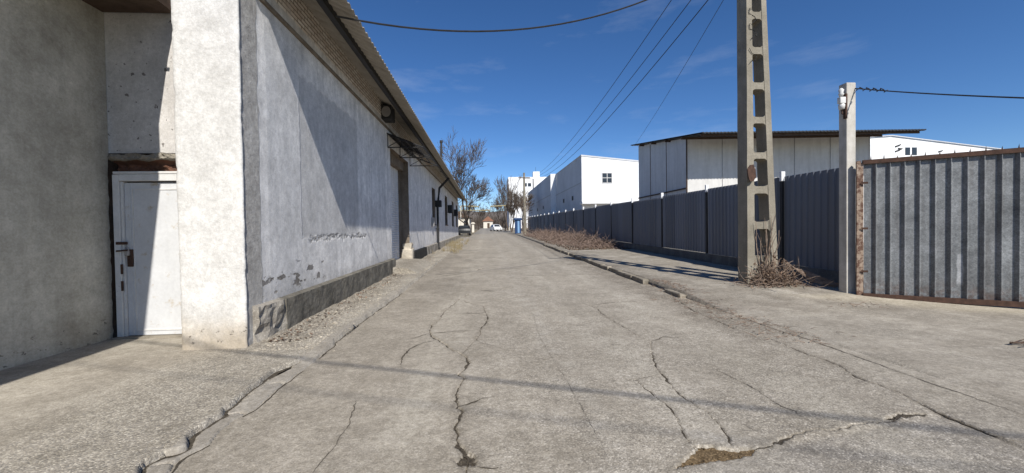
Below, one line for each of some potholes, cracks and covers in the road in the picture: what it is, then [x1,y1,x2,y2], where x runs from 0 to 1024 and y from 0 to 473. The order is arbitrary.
crack [401,290,499,473]
crack [141,295,400,473]
pothole [677,448,755,468]
crack [747,414,926,450]
crack [598,300,730,450]
